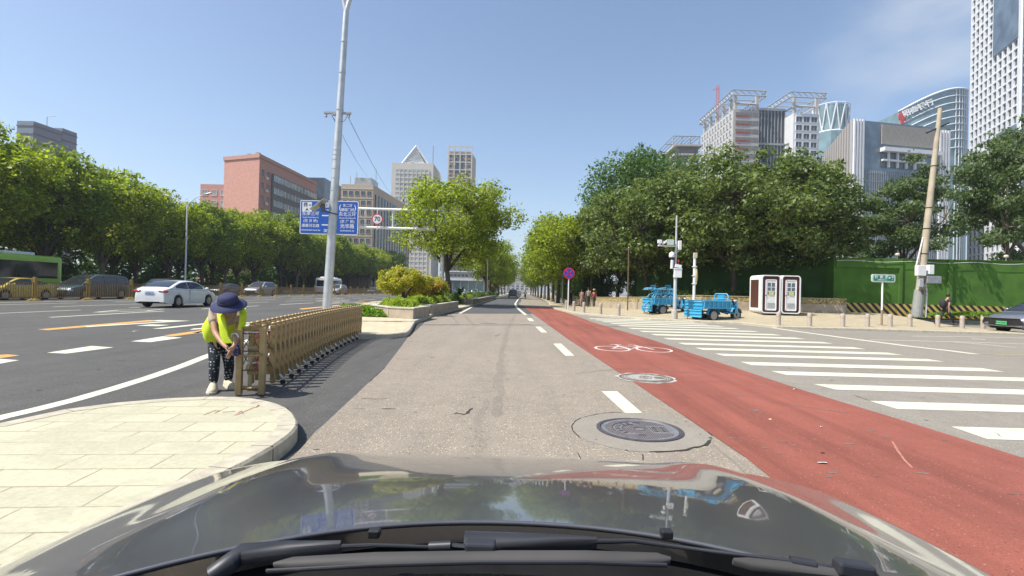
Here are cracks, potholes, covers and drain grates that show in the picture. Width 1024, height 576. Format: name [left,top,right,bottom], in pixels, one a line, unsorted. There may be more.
manhole cover [615,373,677,383]
manhole cover [572,412,711,452]
